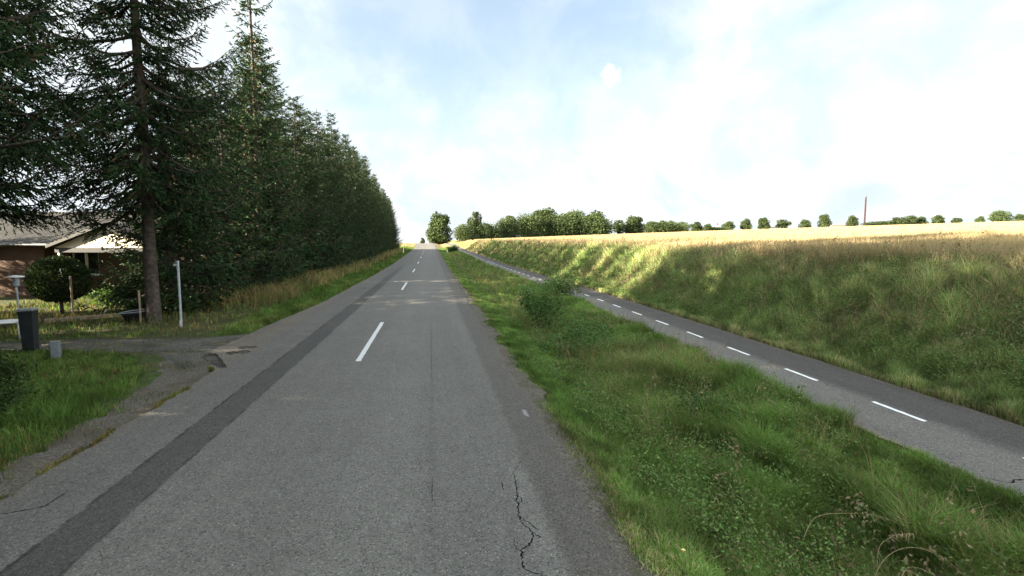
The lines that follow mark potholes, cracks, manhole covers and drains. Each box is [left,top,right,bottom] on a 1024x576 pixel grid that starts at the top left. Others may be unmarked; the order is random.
crack [501,462,542,576]
pothole [203,354,226,368]
crack [4,482,75,514]
